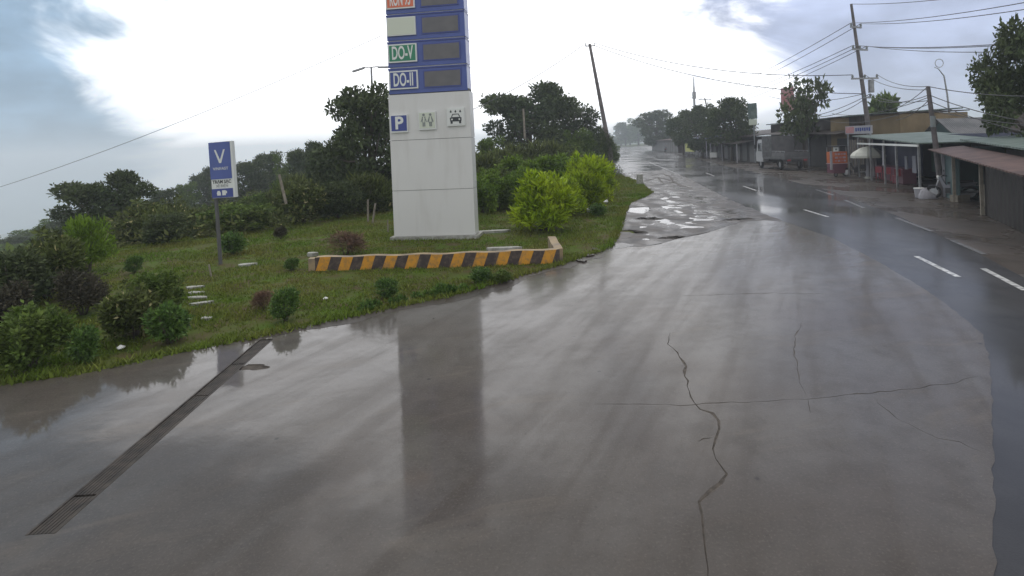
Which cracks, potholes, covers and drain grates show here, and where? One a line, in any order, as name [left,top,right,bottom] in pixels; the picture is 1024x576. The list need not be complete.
crack [667,330,972,576]
